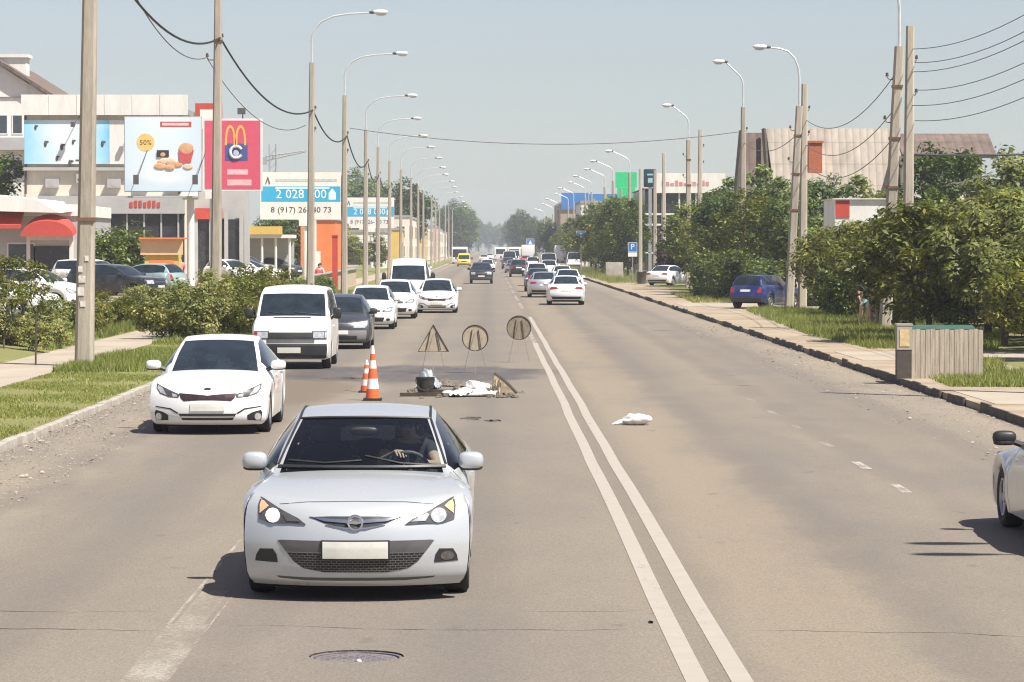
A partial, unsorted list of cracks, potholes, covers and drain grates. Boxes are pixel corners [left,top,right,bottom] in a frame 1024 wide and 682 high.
crack [0,611,134,631]
manhole cover [309,650,404,662]
